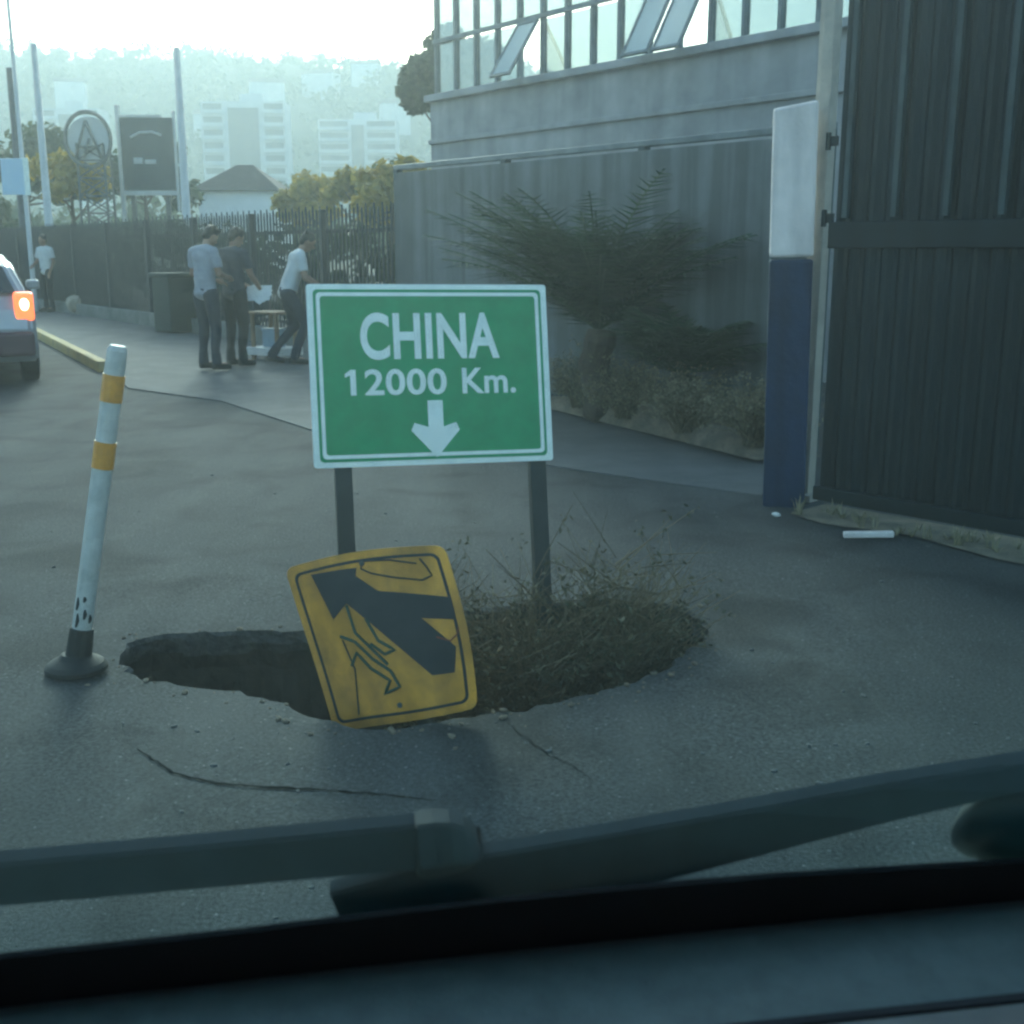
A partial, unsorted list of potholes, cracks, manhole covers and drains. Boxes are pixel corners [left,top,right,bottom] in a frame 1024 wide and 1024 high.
crack [137,749,429,800]
crack [509,724,594,782]
pothole [85,592,720,750]
